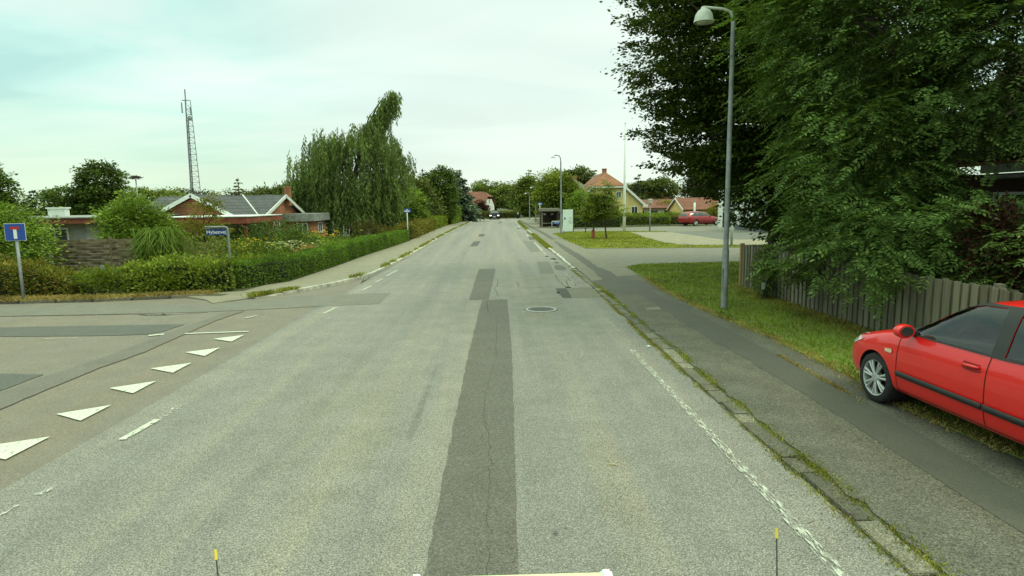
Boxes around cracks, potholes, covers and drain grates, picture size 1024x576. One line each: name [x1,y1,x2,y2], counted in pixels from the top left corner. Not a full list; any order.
crack [483,319,498,576]
